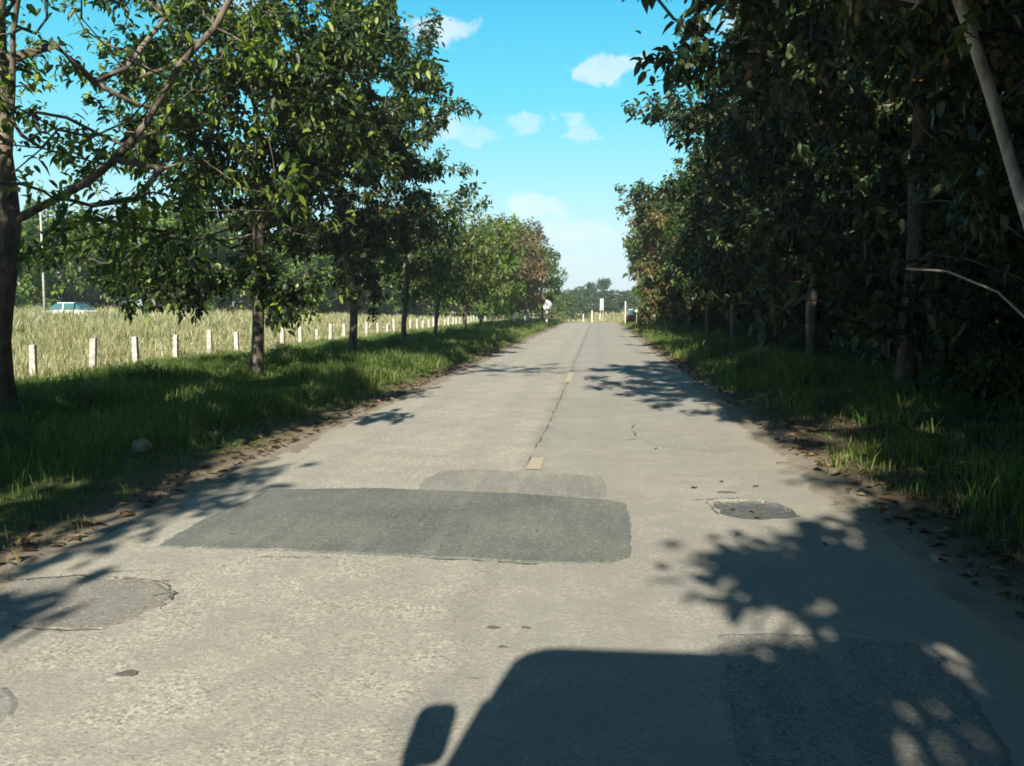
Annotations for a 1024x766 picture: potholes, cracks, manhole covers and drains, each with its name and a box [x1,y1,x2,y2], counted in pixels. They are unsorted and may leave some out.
crack [527,328,589,465]
